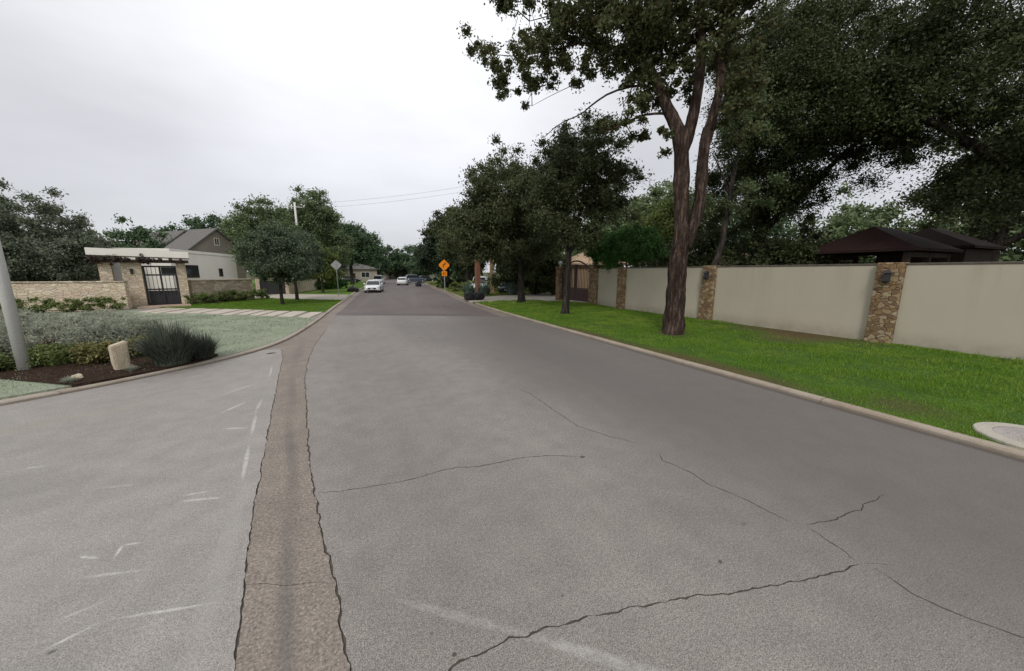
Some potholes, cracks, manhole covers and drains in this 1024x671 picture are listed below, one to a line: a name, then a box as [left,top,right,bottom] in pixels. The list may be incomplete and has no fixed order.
crack [233,330,577,671]
manhole cover [972,422,1024,450]
crack [448,389,1024,671]
